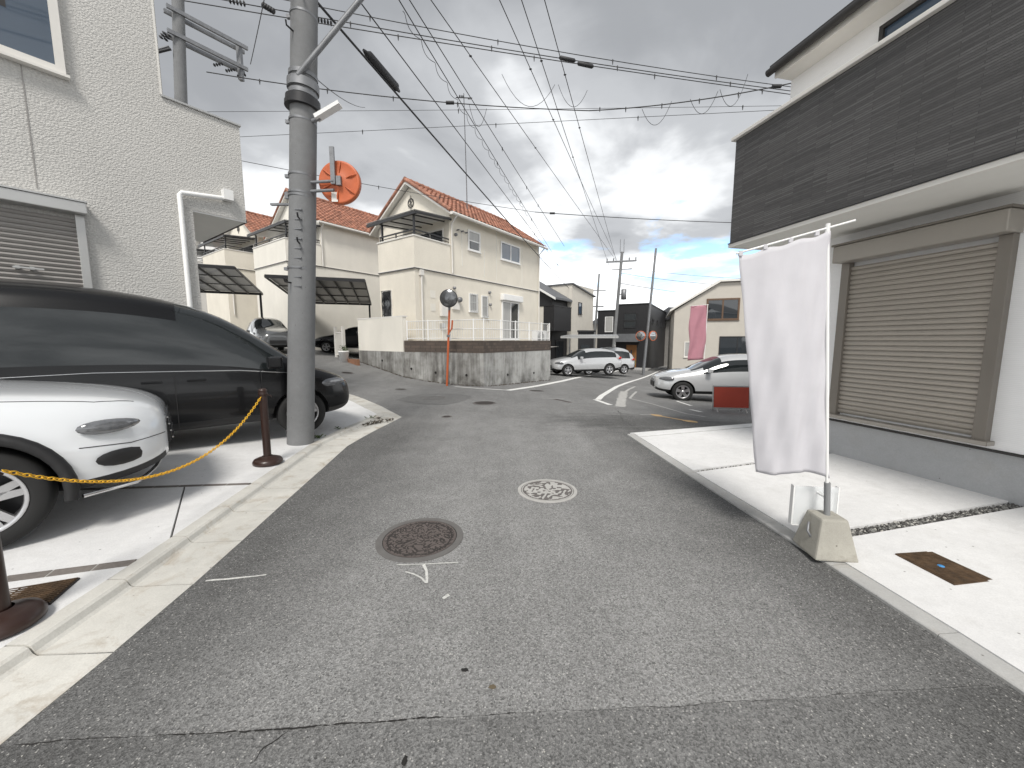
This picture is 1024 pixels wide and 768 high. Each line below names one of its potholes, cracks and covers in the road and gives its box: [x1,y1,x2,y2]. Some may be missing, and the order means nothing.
drain grate [9,577,80,605]
utility cover [895,551,993,585]
manhole cover [375,518,463,563]
manhole cover [518,479,577,503]
